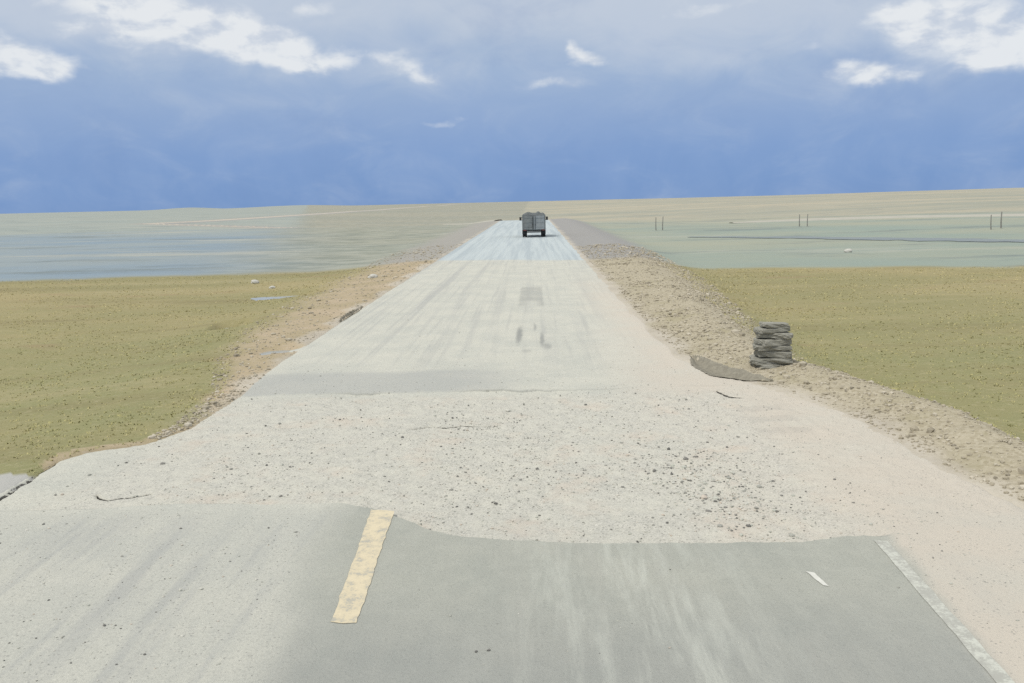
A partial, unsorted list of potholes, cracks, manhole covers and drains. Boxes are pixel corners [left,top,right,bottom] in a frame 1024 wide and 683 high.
pothole [19,386,885,544]
